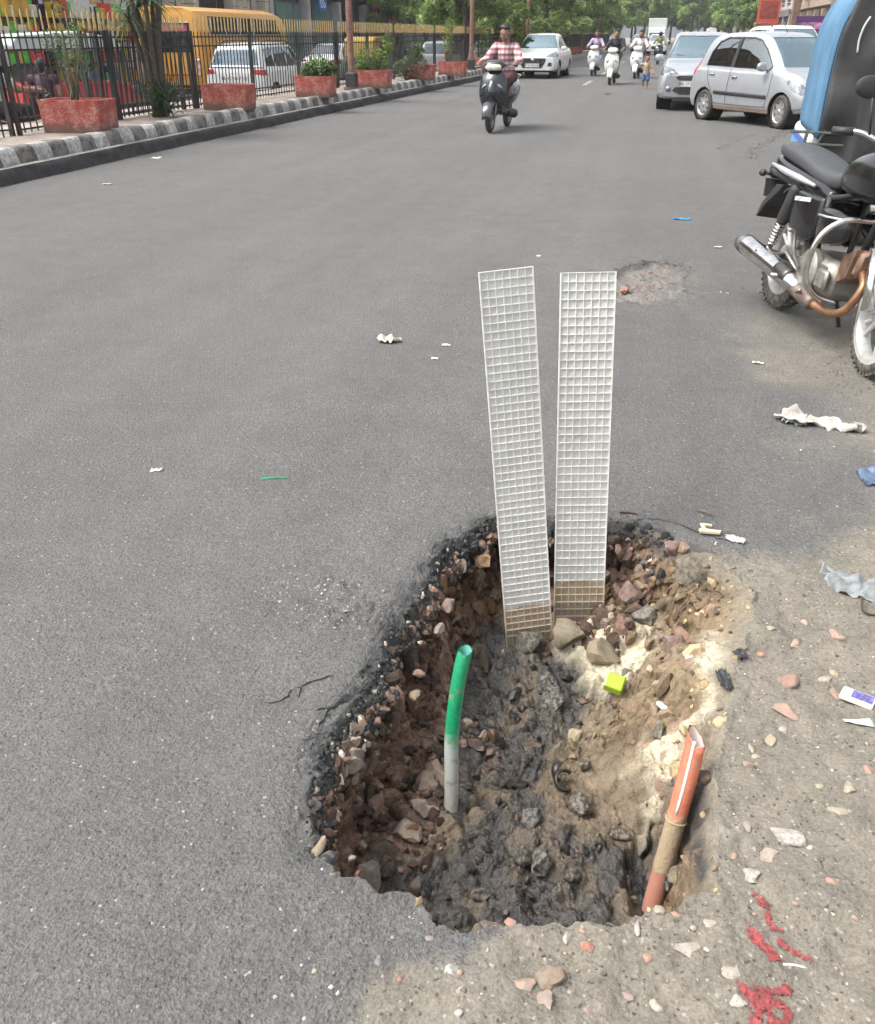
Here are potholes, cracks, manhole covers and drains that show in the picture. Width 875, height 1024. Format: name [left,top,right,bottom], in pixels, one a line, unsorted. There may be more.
pothole [614,261,687,305]
pothole [303,515,756,934]
crack [267,665,372,741]
